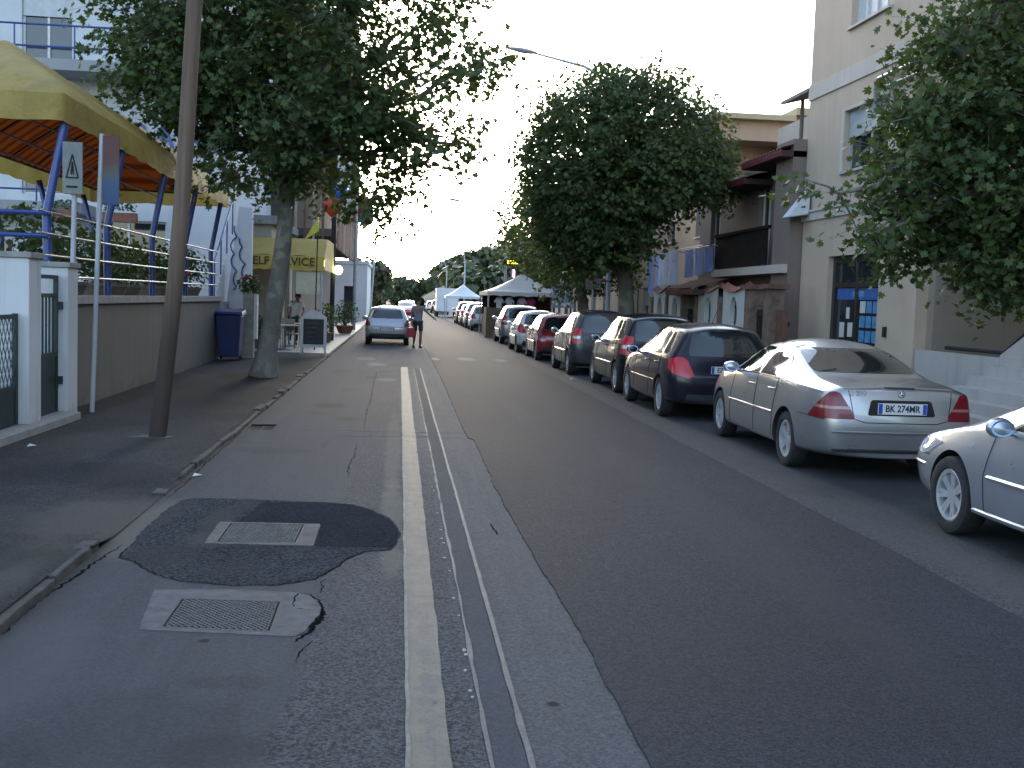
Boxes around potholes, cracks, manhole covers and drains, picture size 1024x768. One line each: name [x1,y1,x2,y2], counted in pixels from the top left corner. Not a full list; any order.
crack [9,544,389,663]
crack [306,371,418,477]
